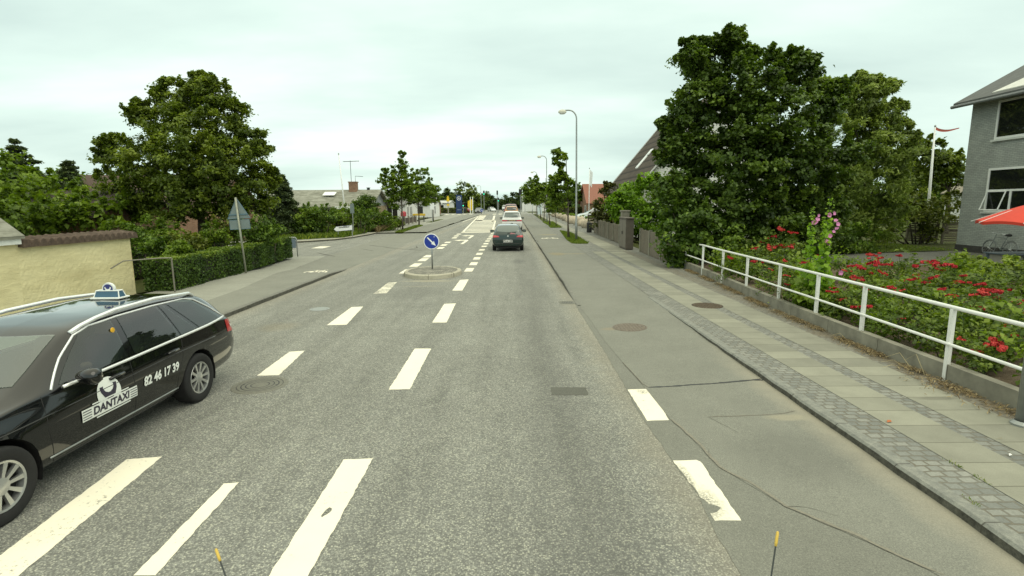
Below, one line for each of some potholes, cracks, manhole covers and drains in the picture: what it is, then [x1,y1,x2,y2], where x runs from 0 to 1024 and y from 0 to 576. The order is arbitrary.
manhole cover [230,376,289,394]
manhole cover [612,323,647,331]
crack [672,411,945,575]
